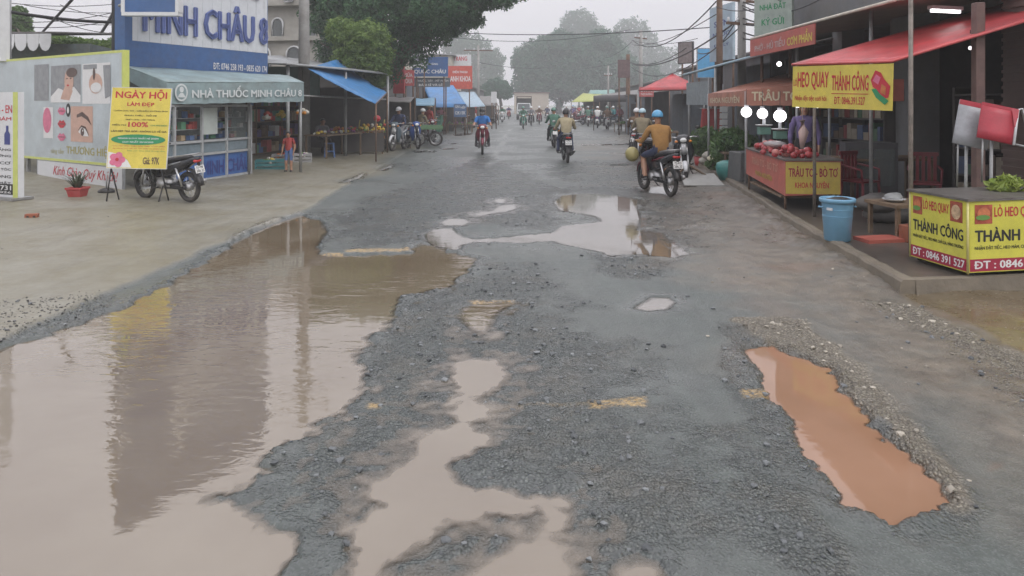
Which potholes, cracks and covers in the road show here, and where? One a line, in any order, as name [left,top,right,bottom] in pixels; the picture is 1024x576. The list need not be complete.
pothole [0,212,500,576]
pothole [397,190,710,263]
pothole [736,337,962,531]
